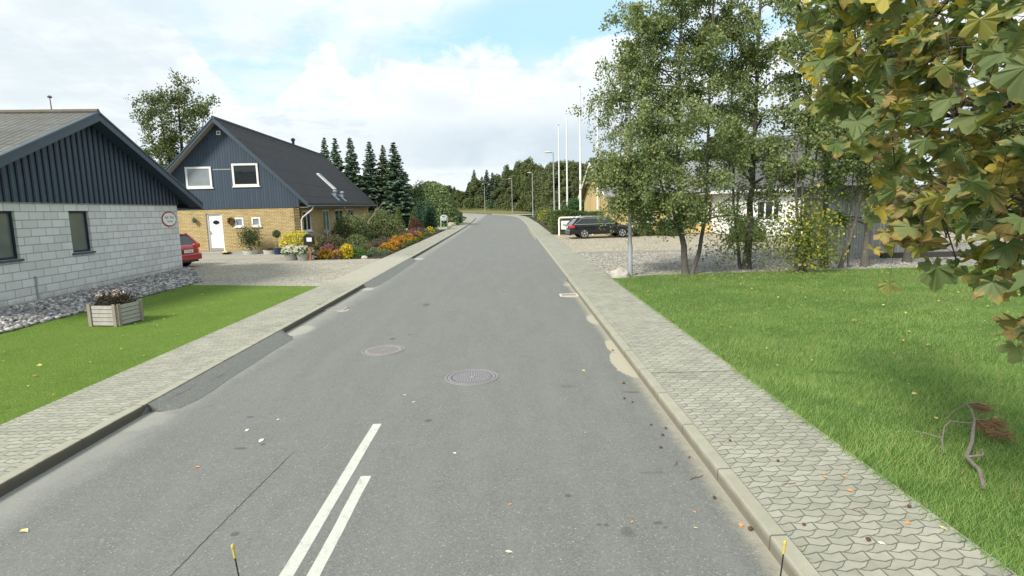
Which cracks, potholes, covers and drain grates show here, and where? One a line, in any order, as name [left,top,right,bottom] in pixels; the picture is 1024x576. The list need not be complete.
crack [170,450,296,576]
manhole cover [445,369,498,386]
manhole cover [361,345,405,356]
